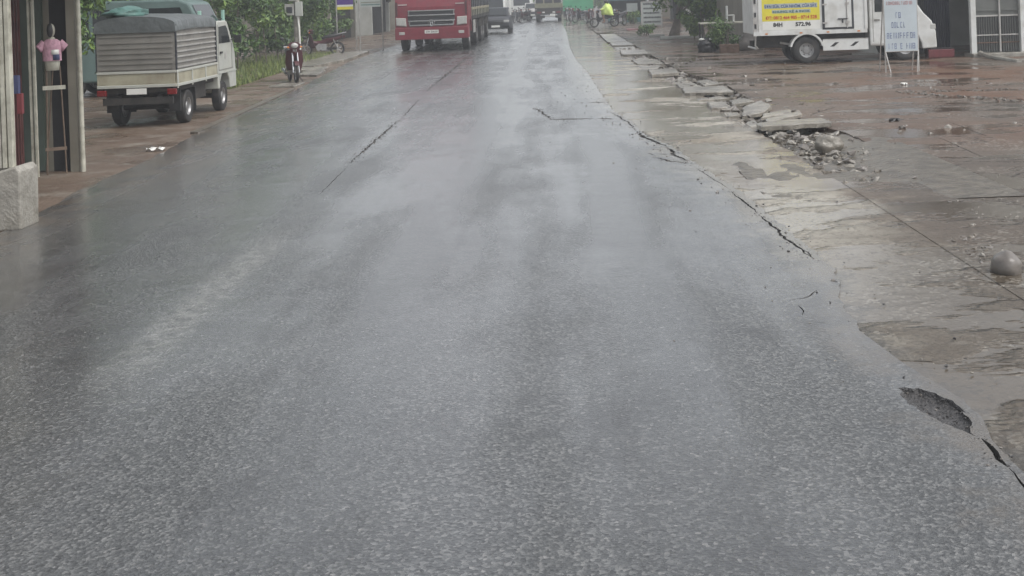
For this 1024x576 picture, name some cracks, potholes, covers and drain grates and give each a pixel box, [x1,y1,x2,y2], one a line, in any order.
crack [320,53,484,194]
crack [534,101,815,259]
crack [979,435,1024,487]
pothole [899,387,983,440]
